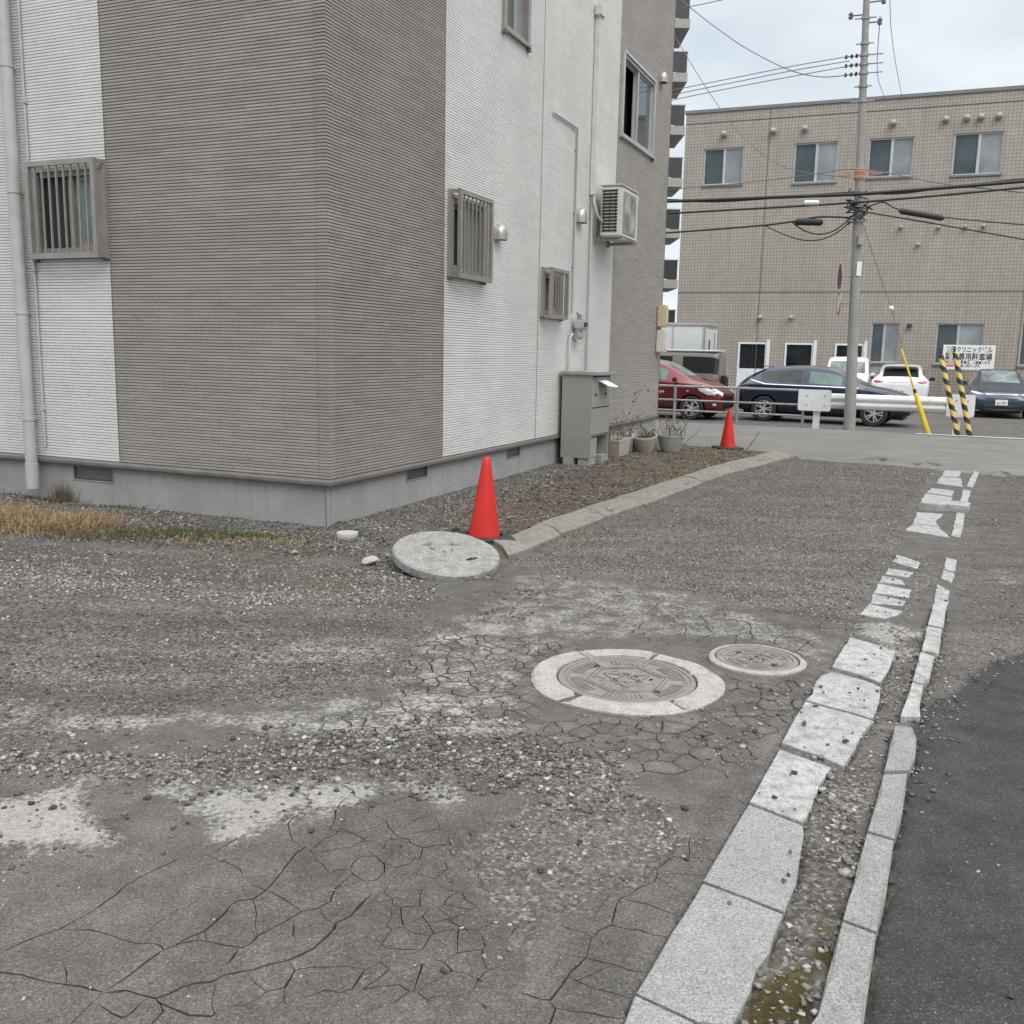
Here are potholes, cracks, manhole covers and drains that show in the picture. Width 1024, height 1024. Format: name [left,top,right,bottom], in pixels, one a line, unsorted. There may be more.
manhole cover [531,649,725,717]
manhole cover [708,644,807,678]
crack [321,569,823,775]
crack [0,783,748,1024]
